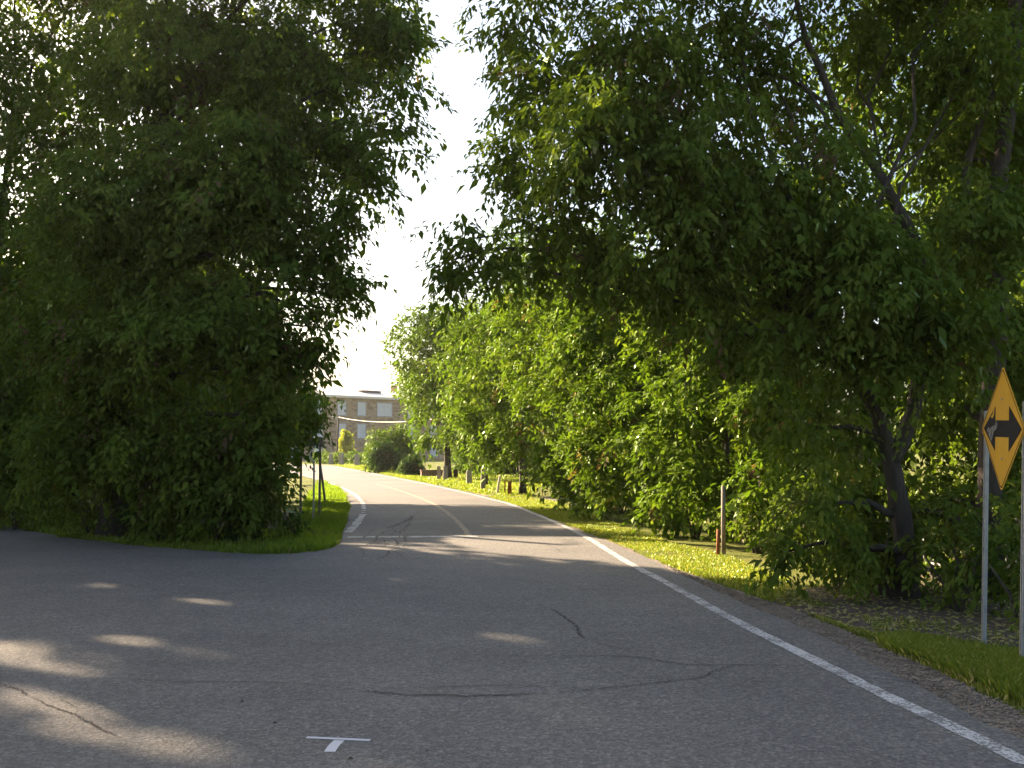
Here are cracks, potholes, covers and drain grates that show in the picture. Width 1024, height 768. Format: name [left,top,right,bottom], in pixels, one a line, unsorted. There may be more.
crack [453,608,835,666]
crack [0,683,114,734]
crack [363,504,426,562]
crack [120,665,729,697]
